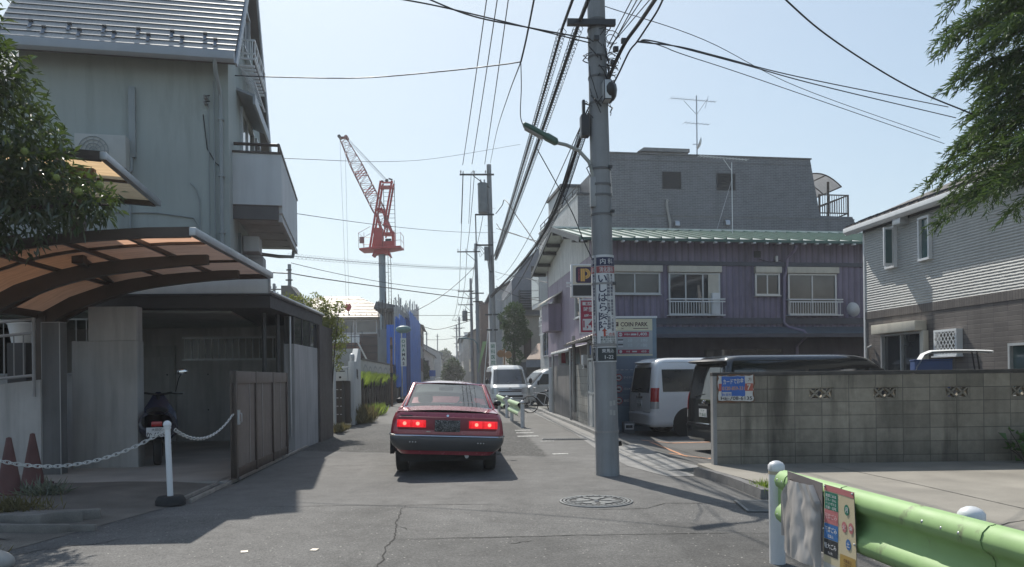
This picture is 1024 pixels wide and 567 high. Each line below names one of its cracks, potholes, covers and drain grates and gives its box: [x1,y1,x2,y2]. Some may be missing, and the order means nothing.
drain grate [734,500,769,512]
manhole cover [559,495,633,508]
crack [377,505,407,567]
